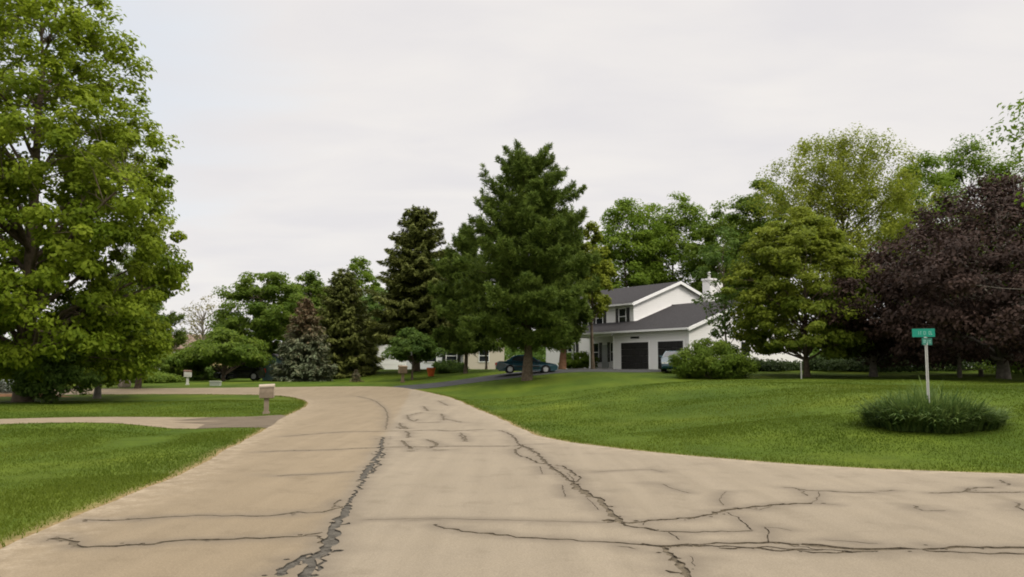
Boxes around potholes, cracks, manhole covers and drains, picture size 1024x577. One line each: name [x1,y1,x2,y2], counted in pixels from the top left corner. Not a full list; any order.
crack [269,401,467,452]
crack [369,430,1024,577]
crack [46,500,343,548]
